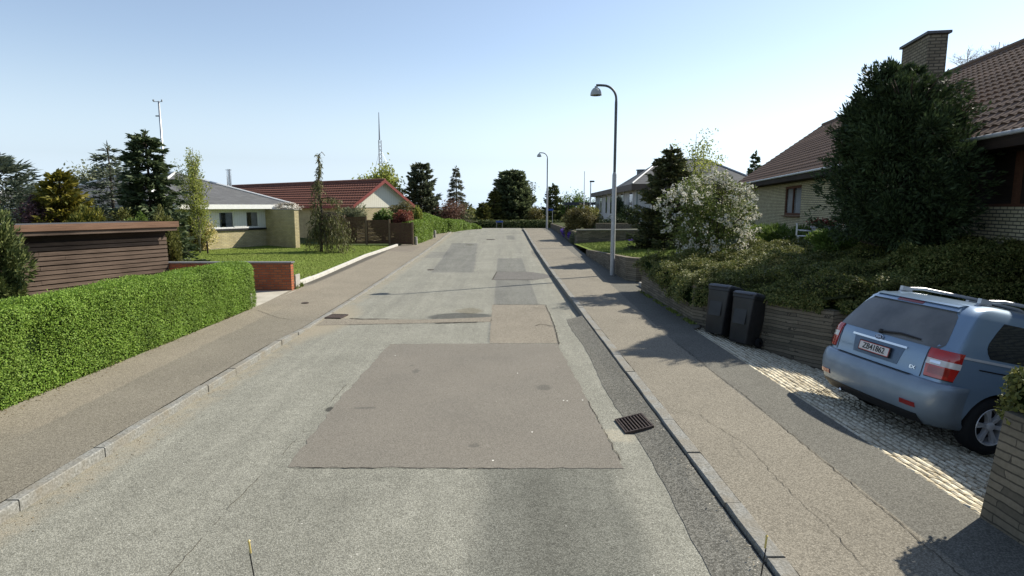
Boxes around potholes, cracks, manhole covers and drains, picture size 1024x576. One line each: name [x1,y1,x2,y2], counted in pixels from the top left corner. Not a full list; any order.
drain grate [615,413,654,434]
